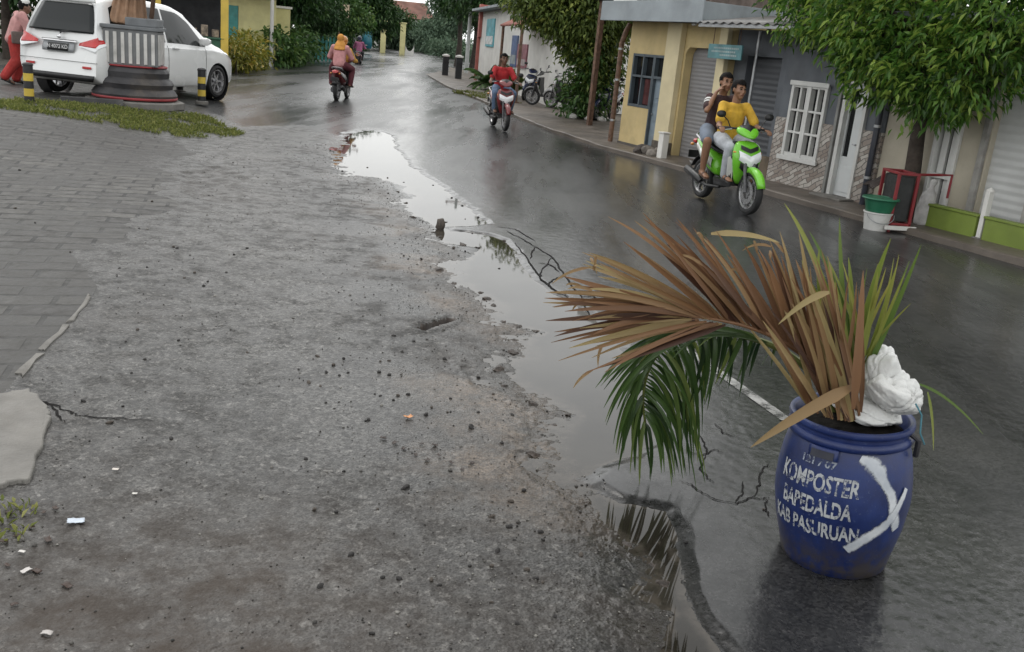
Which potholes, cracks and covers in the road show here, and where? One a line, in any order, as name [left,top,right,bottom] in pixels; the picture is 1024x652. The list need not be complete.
crack [43,401,153,422]
pothole [328,128,664,495]
crack [687,423,769,515]
crack [499,226,596,315]
